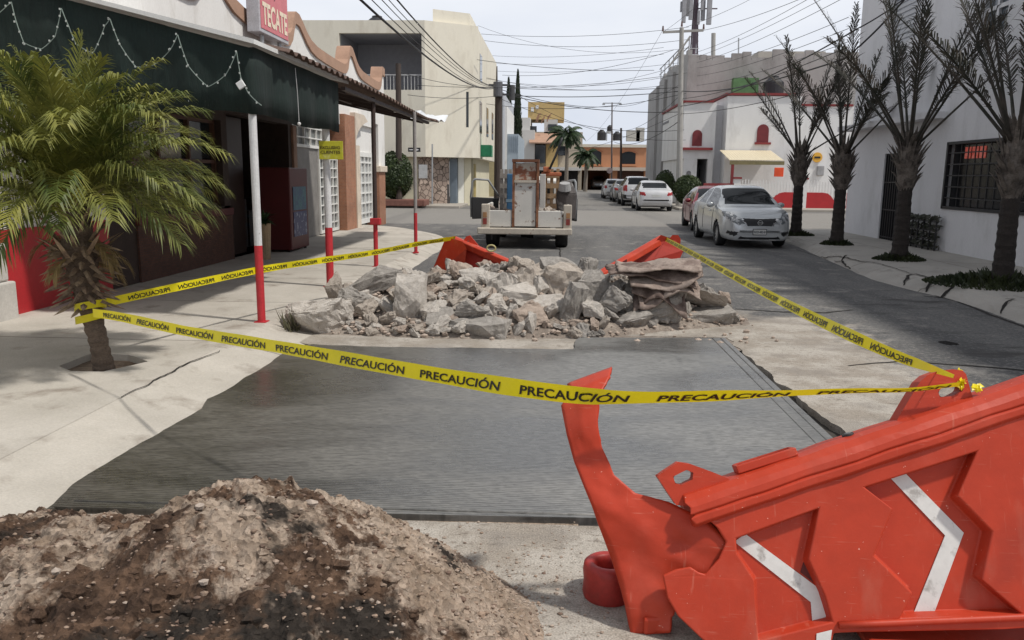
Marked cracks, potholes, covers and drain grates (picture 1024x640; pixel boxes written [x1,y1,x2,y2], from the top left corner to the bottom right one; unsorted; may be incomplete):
crack [121,350,220,397]
